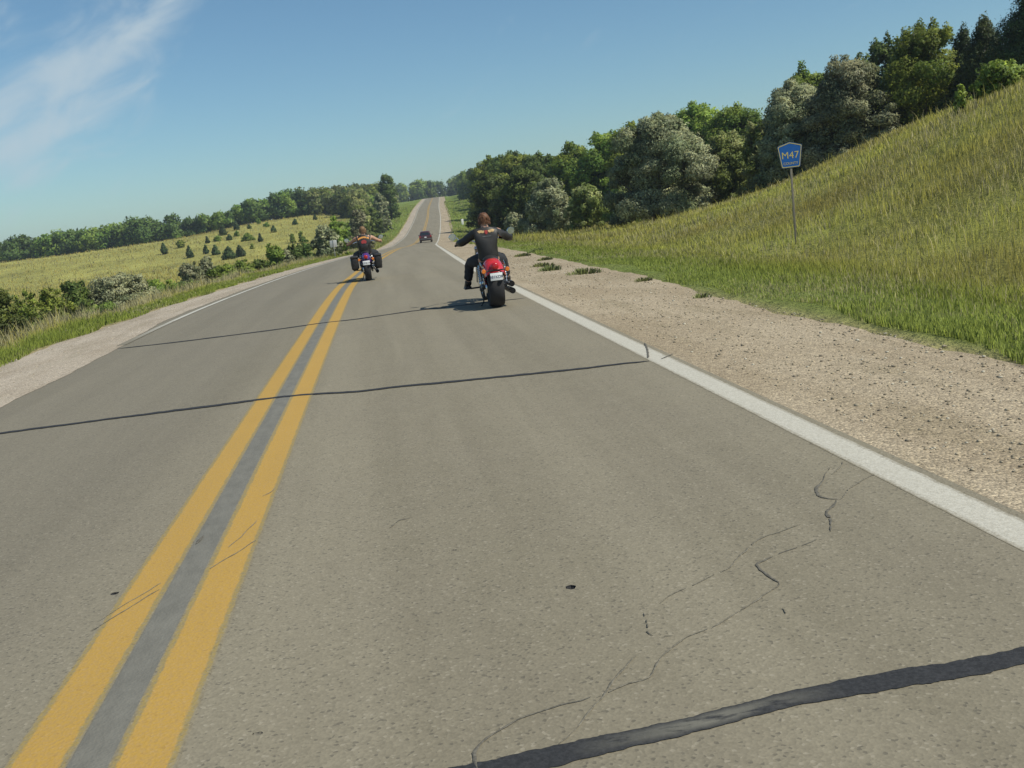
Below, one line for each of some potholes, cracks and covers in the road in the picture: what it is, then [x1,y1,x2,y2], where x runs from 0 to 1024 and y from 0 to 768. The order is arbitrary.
crack [211,520,257,568]
crack [472,462,874,767]
crack [92,583,160,630]
